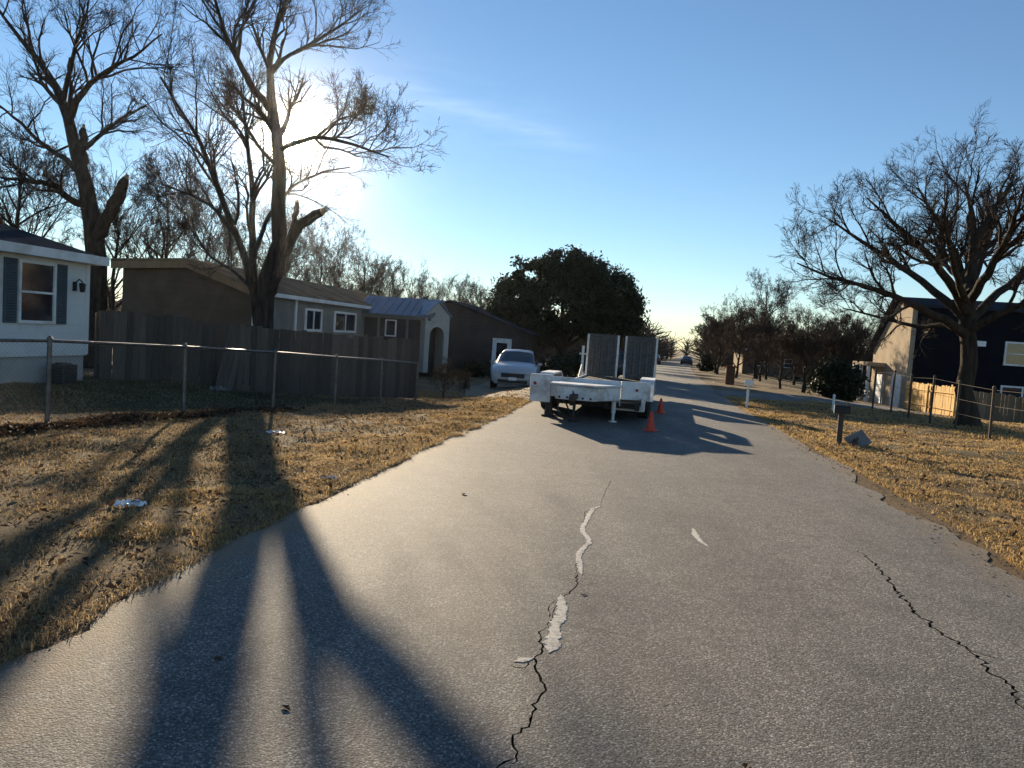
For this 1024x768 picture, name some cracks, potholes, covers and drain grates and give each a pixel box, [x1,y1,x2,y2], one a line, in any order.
crack [857,550,1024,709]
crack [497,480,611,768]
